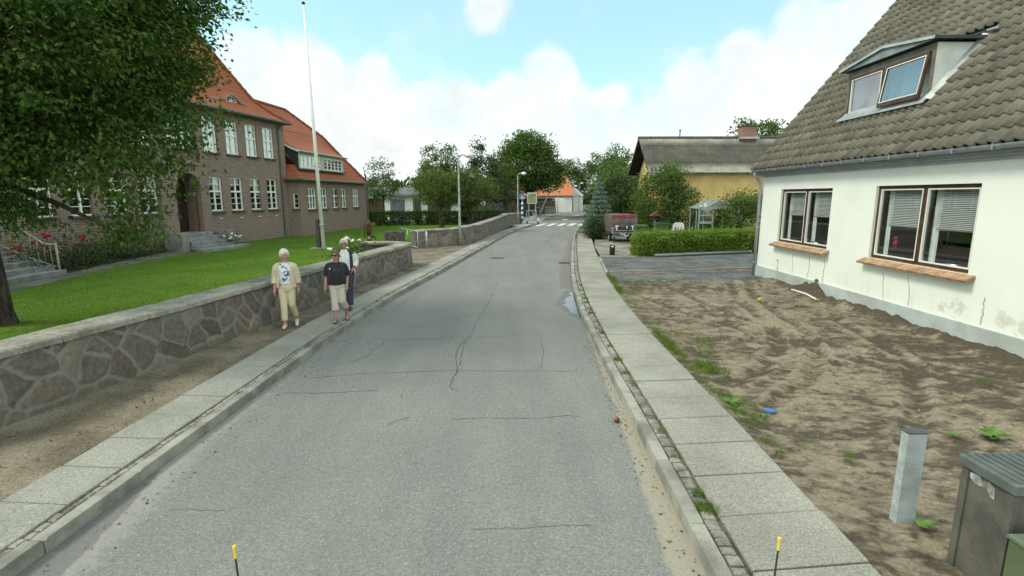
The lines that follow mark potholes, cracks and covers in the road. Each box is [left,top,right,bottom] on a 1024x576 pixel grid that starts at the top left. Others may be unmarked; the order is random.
crack [449,283,498,390]
